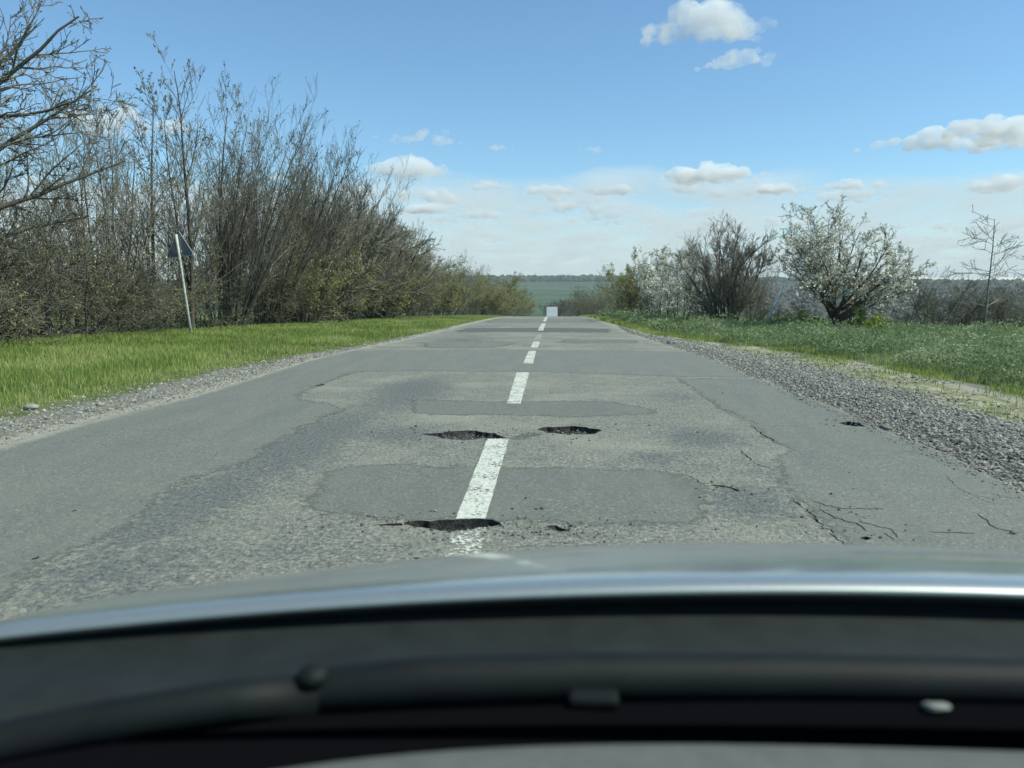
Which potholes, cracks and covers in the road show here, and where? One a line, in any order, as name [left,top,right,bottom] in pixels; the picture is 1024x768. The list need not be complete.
pothole [404,519,501,531]
pothole [424,430,507,440]
pothole [540,426,602,435]
crack [788,475,1017,544]
